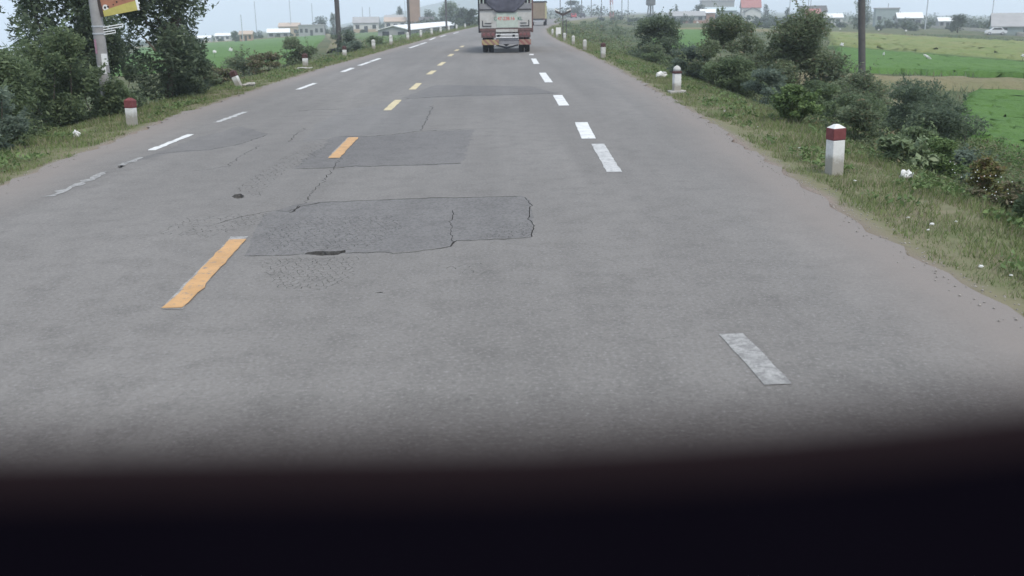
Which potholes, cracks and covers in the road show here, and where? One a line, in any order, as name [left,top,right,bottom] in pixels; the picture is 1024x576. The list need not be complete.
crack [163,130,535,289]
crack [366,93,548,137]
